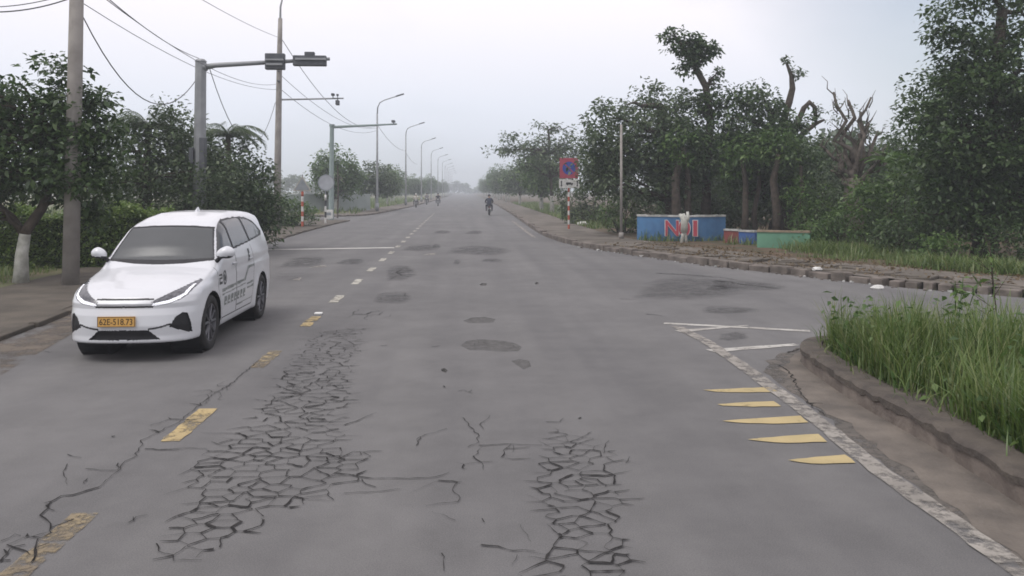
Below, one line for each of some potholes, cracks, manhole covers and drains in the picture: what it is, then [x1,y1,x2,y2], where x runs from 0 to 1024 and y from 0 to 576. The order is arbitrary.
crack [779,348,824,414]
pothole [512,359,531,369]
crack [274,328,365,389]
pothole [460,339,522,352]
crack [155,384,644,576]
crack [0,360,259,562]
